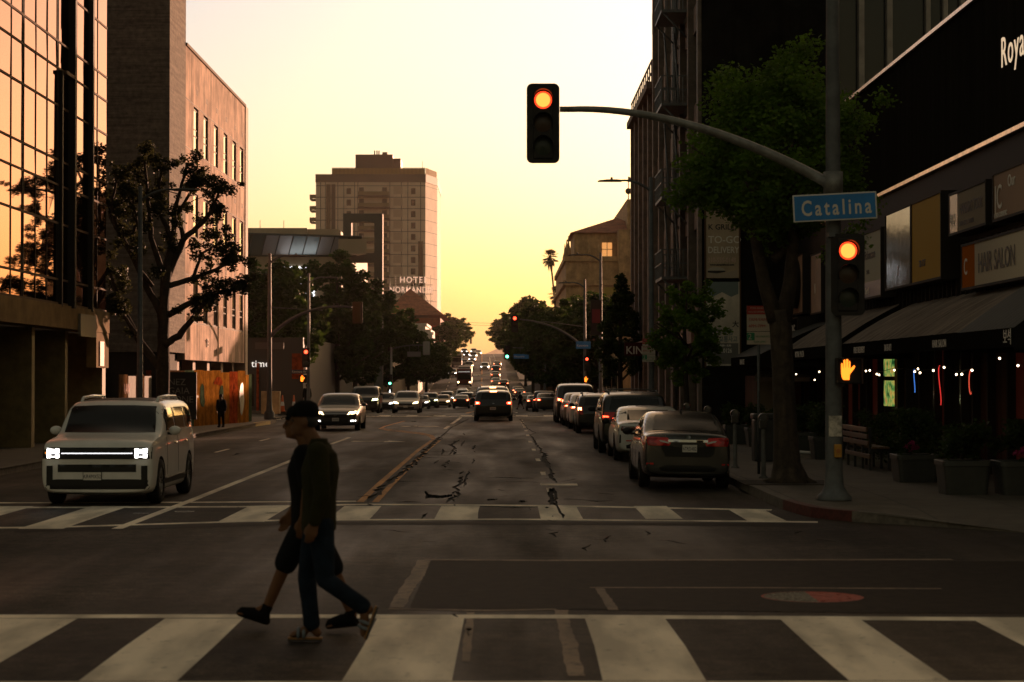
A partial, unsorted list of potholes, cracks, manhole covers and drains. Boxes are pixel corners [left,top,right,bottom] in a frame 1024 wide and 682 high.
manhole cover [761,591,864,602]
crack [360,419,610,537]
